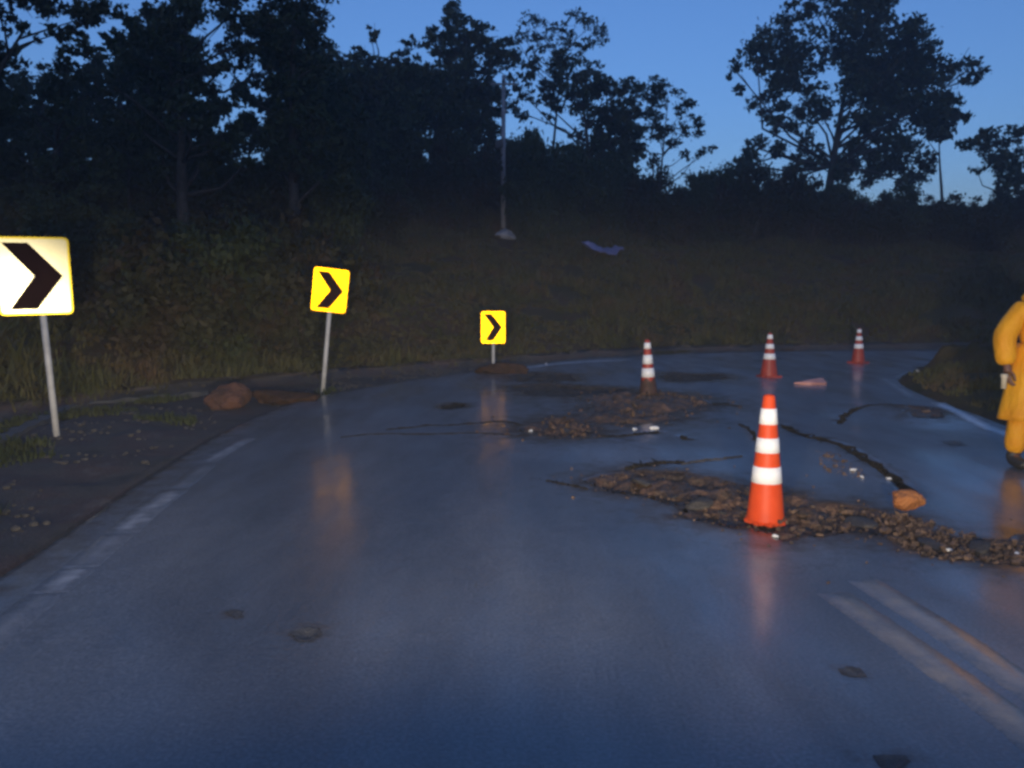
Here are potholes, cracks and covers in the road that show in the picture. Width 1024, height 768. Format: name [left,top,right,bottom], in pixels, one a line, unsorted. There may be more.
pothole [224,609,244,618]
pothole [873,754,911,768]
pothole [587,472,1024,565]
pothole [576,391,712,424]
pothole [838,666,867,676]
pothole [288,627,323,642]
crack [340,421,529,438]
pothole [520,418,593,437]
crack [781,404,917,492]
